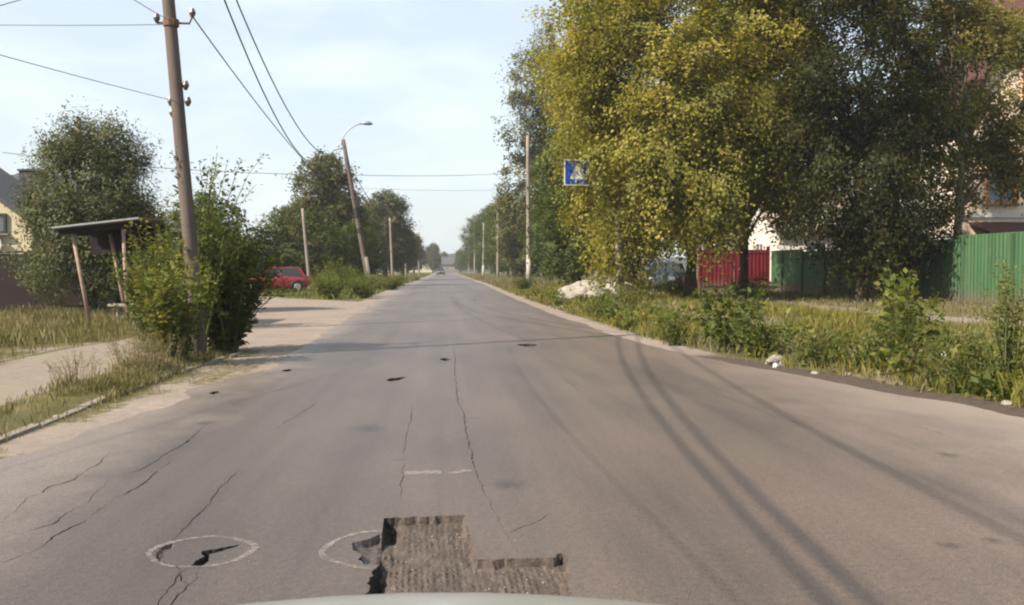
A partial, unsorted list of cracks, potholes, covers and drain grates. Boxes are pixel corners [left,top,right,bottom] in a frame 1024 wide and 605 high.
pothole [366,515,572,596]
crack [0,428,202,563]
crack [452,345,550,551]
pothole [351,534,382,565]
